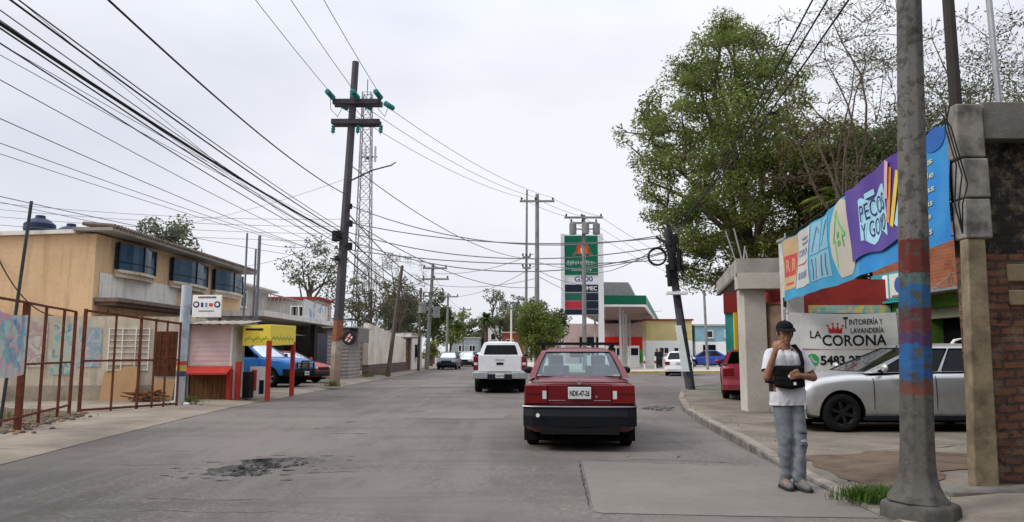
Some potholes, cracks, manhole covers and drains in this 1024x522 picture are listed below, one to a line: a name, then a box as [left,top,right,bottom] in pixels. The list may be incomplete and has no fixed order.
pothole [159,454,353,481]
